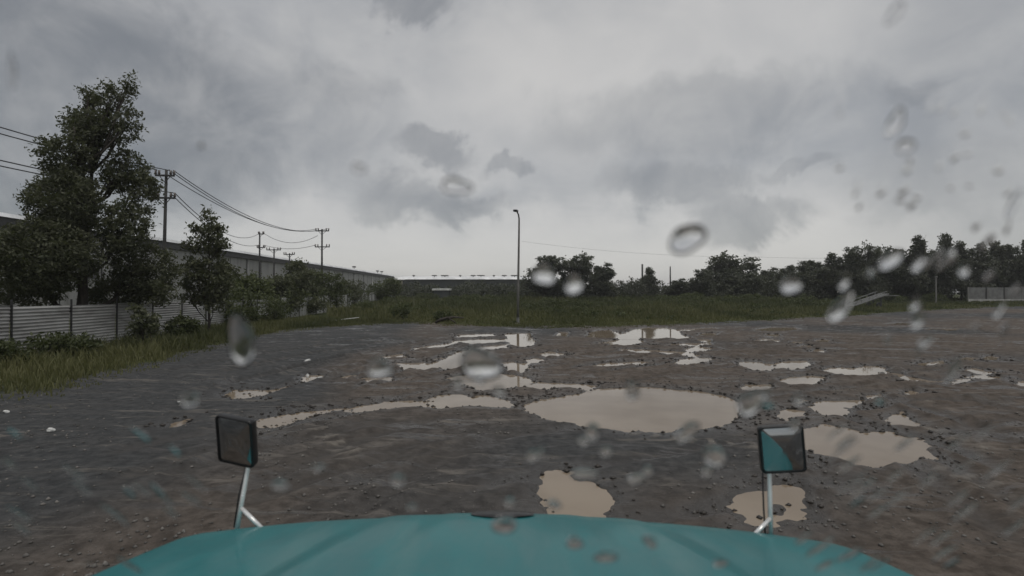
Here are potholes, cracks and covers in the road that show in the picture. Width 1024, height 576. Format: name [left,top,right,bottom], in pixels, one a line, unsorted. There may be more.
pothole [502,362,531,373]
pothole [739,362,777,371]
pothole [726,485,807,528]
pothole [225,386,287,399]
pothole [503,333,535,347]
pothole [808,400,859,416]
pothole [396,356,461,370]
pothole [768,361,811,370]
pothole [823,366,895,375]
pothole [780,376,825,384]
pothole [524,387,739,433]
pothole [884,412,921,426]
